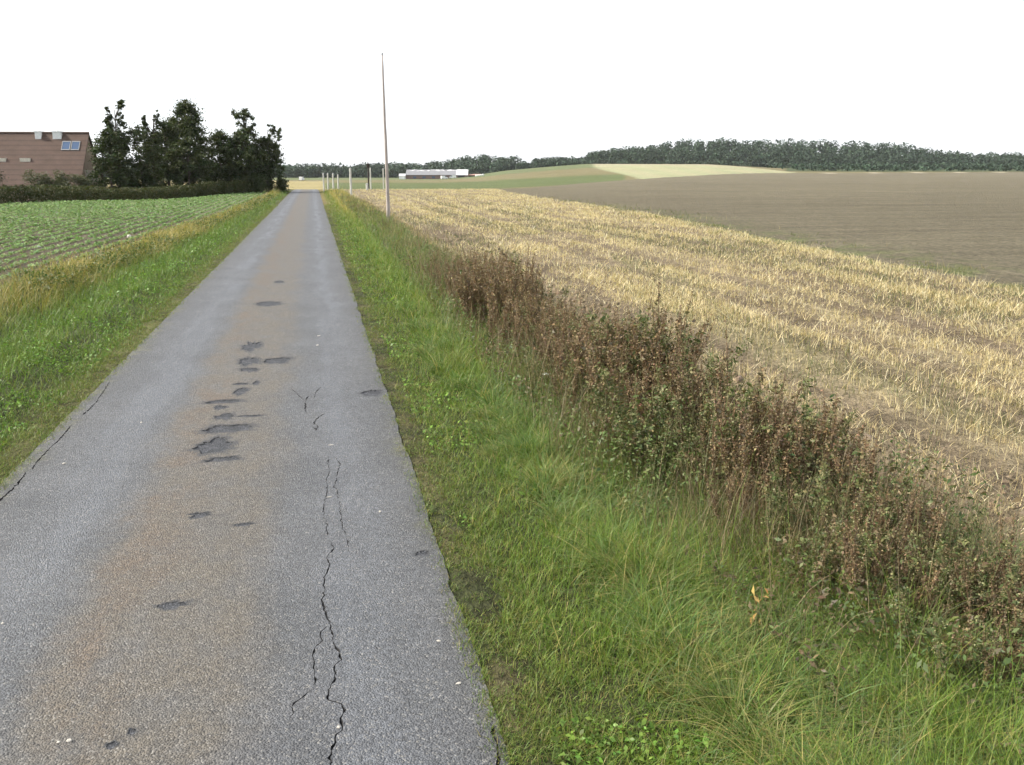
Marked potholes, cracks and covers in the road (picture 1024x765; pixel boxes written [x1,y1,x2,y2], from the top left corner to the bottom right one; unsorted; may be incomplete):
pothole [192,437,233,454]
pothole [242,341,262,351]
crack [291,456,349,765]
pothole [201,424,252,433]
pothole [239,357,260,366]
crack [292,385,324,431]
pothole [157,601,188,609]
crack [0,382,110,501]
